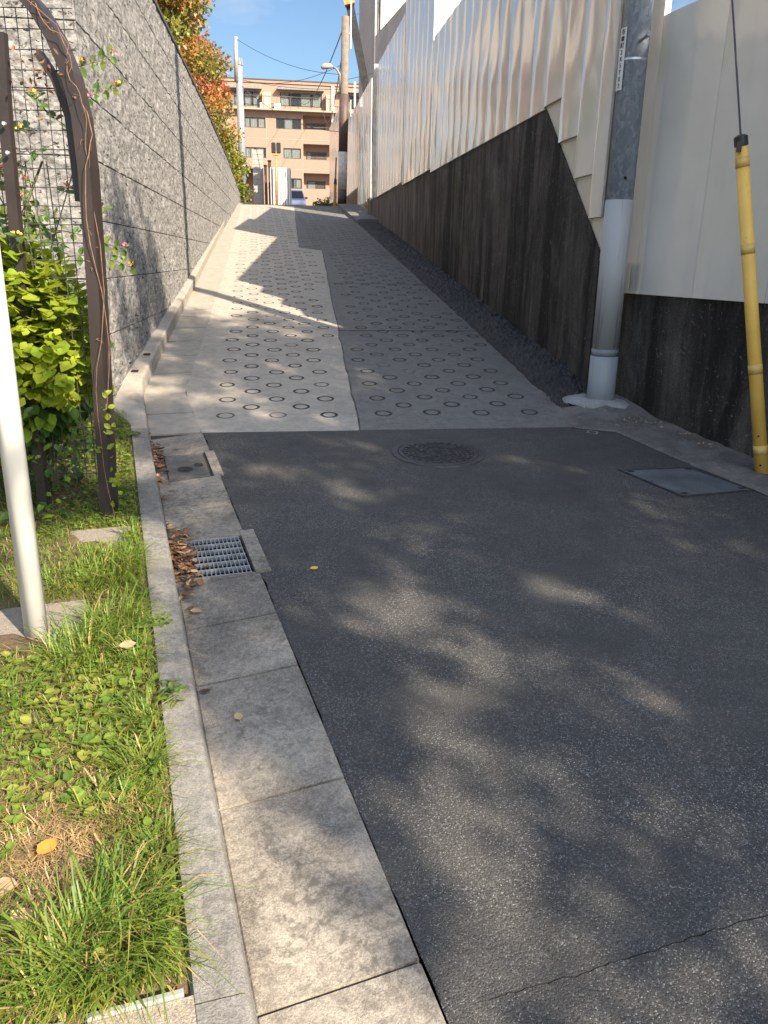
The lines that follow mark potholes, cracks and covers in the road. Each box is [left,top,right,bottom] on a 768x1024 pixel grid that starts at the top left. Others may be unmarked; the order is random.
manhole cover [618,467,755,498]
manhole cover [154,450,224,484]
drain grate [169,529,271,593]
manhole cover [391,439,485,468]
crack [477,914,768,1003]
